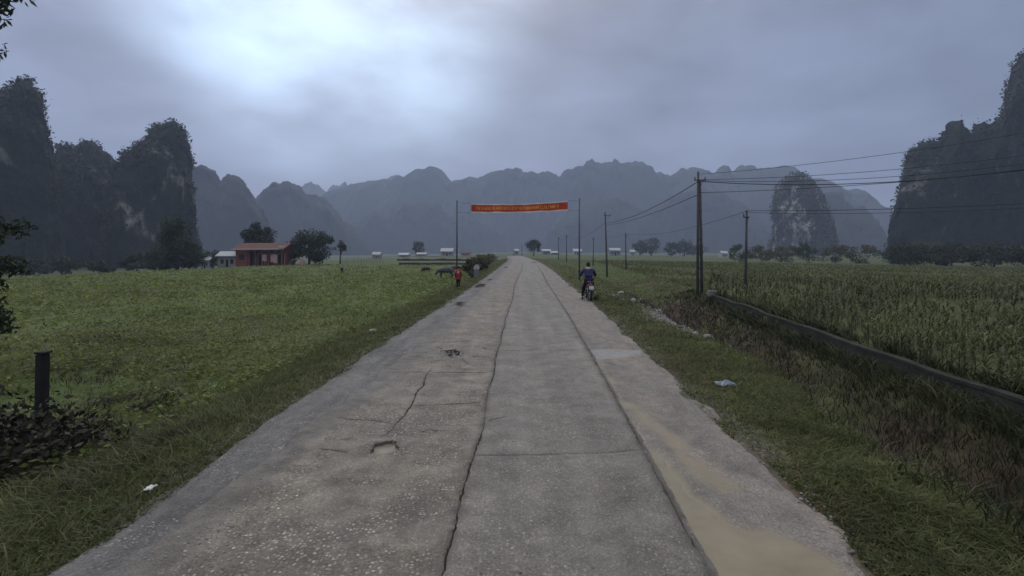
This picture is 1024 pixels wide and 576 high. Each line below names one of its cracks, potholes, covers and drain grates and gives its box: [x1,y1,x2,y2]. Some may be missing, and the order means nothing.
pothole [364,439,405,457]
